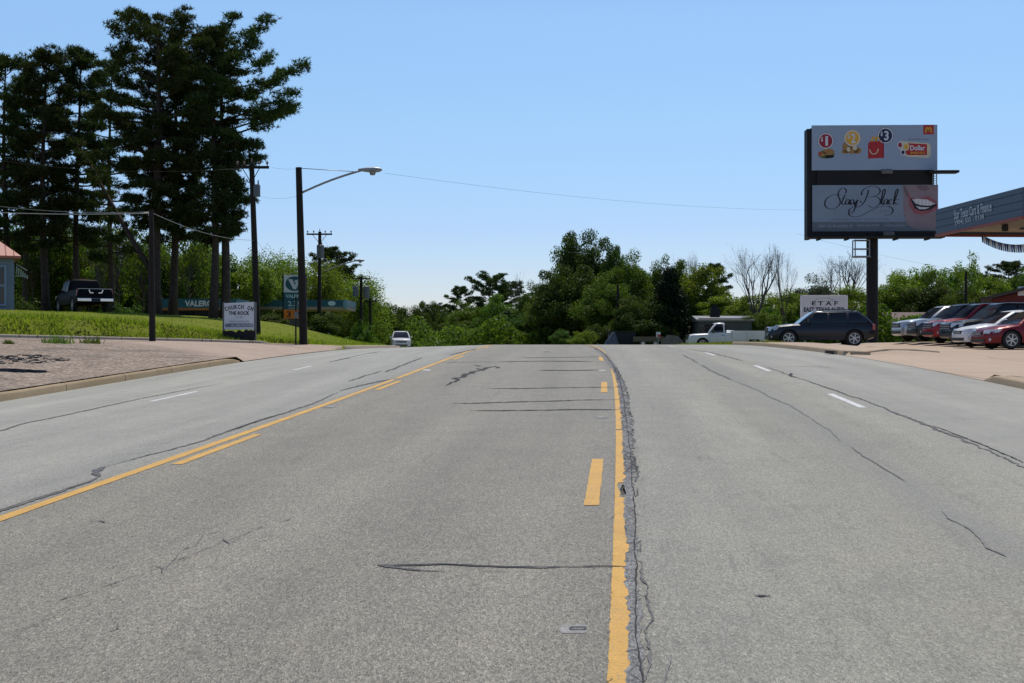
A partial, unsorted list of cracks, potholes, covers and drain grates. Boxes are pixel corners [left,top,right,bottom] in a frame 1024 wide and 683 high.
crack [0,349,623,511]
crack [686,349,1023,482]
crack [942,511,1006,556]
crack [59,519,288,600]
